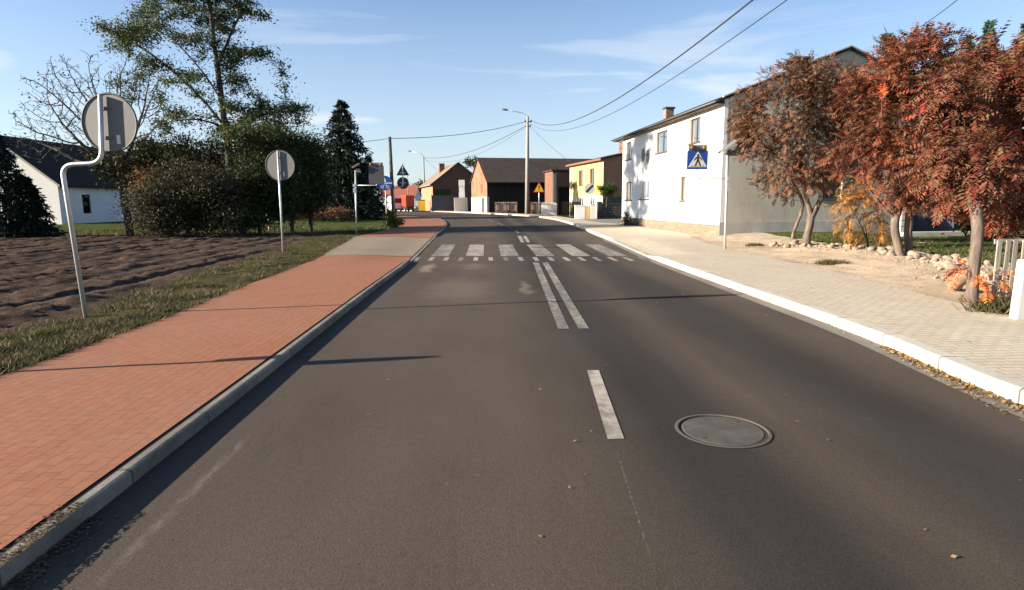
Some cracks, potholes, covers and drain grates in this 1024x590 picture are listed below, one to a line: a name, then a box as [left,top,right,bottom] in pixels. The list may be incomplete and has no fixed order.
manhole cover [675,414,773,448]
